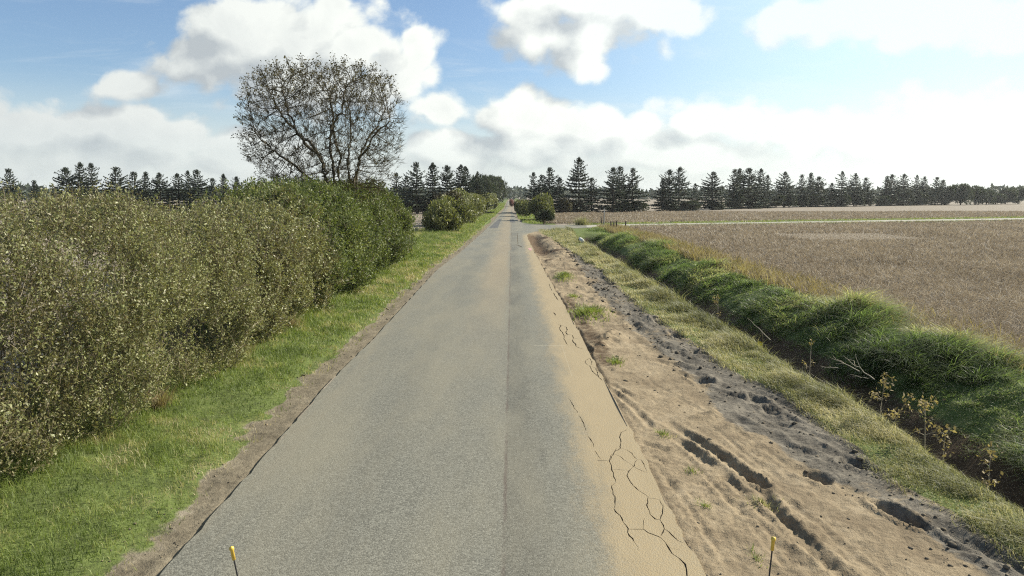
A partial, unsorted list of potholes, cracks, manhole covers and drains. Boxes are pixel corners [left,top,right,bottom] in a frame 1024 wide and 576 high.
crack [549,284,602,380]
crack [569,399,688,576]
